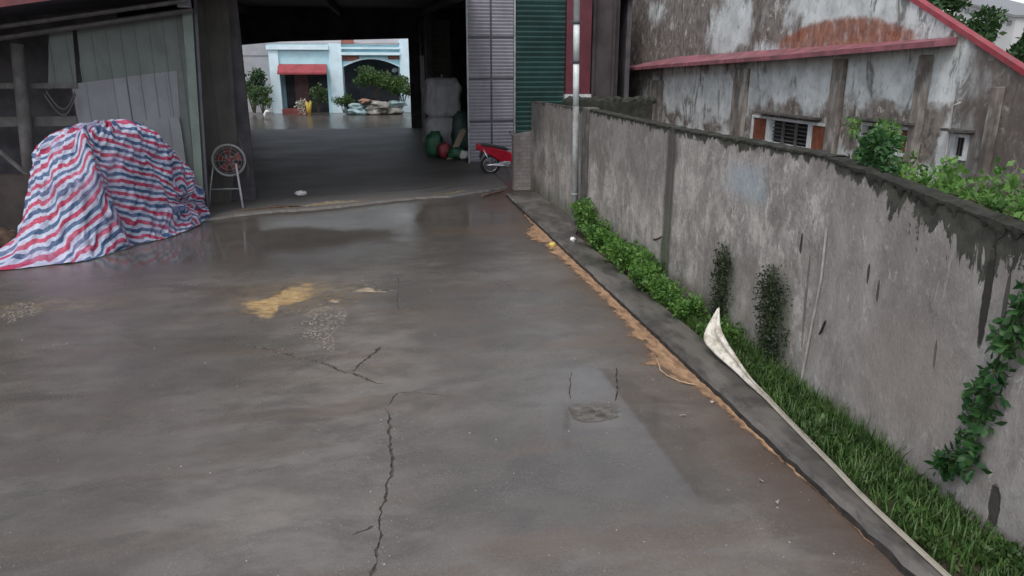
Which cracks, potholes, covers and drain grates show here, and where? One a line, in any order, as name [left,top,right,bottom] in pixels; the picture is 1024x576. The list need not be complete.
crack [233,343,452,576]
